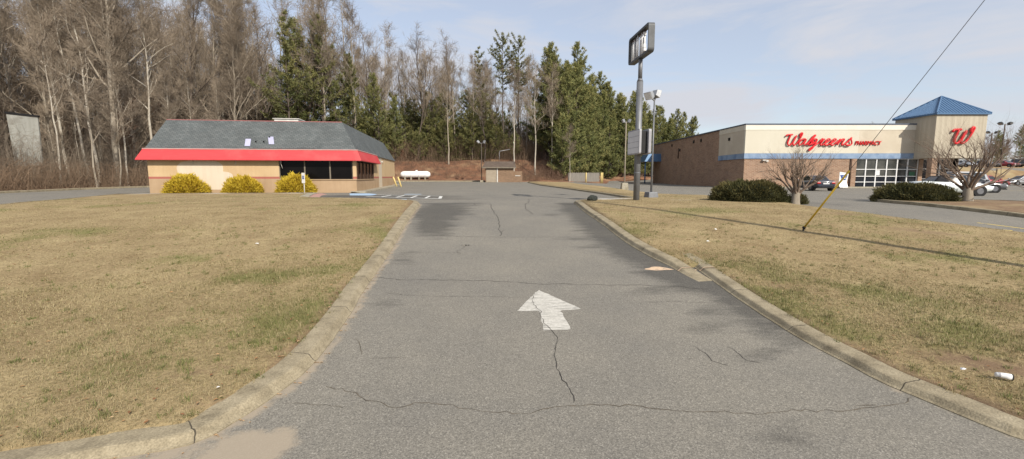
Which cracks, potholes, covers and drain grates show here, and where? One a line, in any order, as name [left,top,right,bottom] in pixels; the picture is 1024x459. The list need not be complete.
crack [283,277,912,414]
